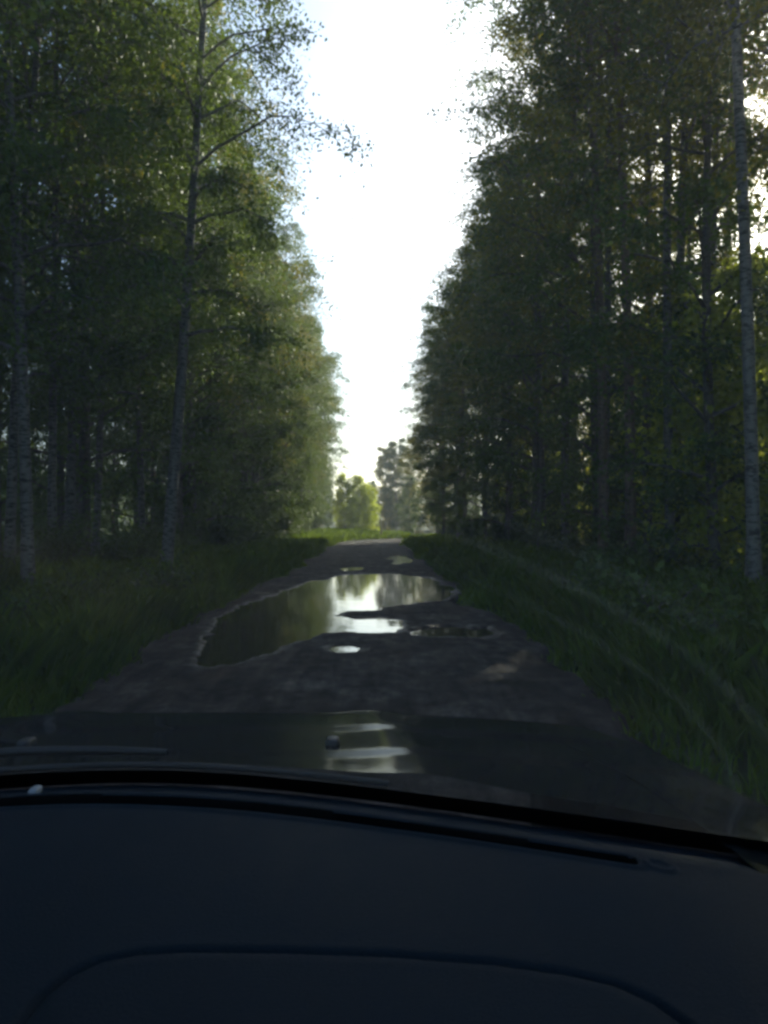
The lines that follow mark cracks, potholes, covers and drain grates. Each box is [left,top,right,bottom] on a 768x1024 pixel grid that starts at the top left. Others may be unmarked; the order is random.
pothole [381,554,419,565]
pothole [179,573,461,669]
pothole [403,622,507,640]
